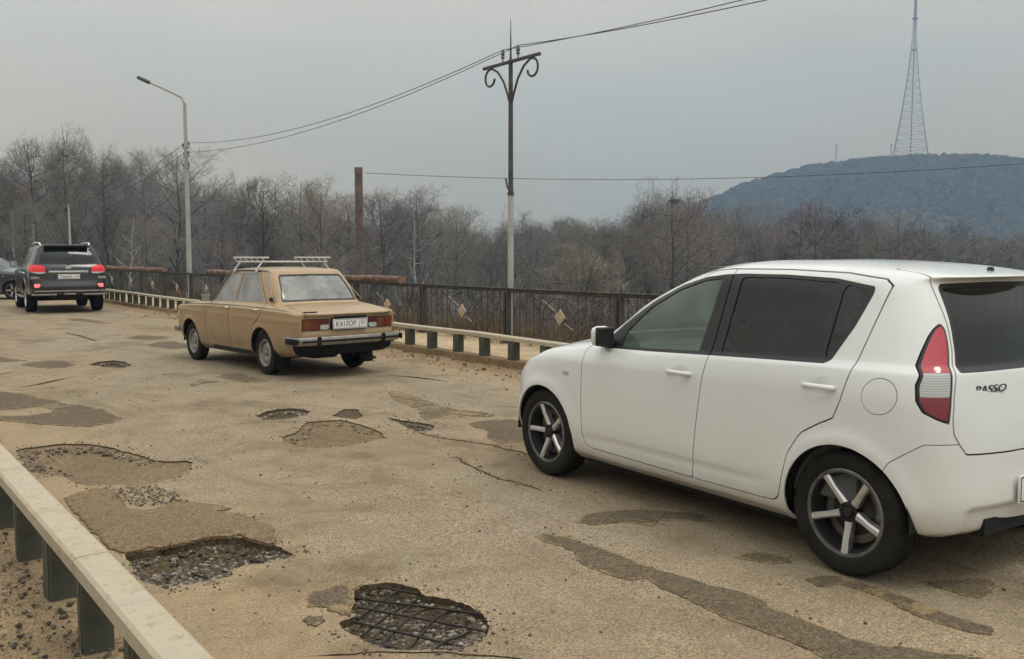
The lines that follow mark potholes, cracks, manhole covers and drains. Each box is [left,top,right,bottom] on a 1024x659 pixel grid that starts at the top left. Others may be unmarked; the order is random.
pothole [125,537,293,586]
pothole [389,418,435,432]
pothole [340,582,490,651]
crack [418,432,542,491]
pothole [89,360,131,368]
pothole [257,408,311,420]
